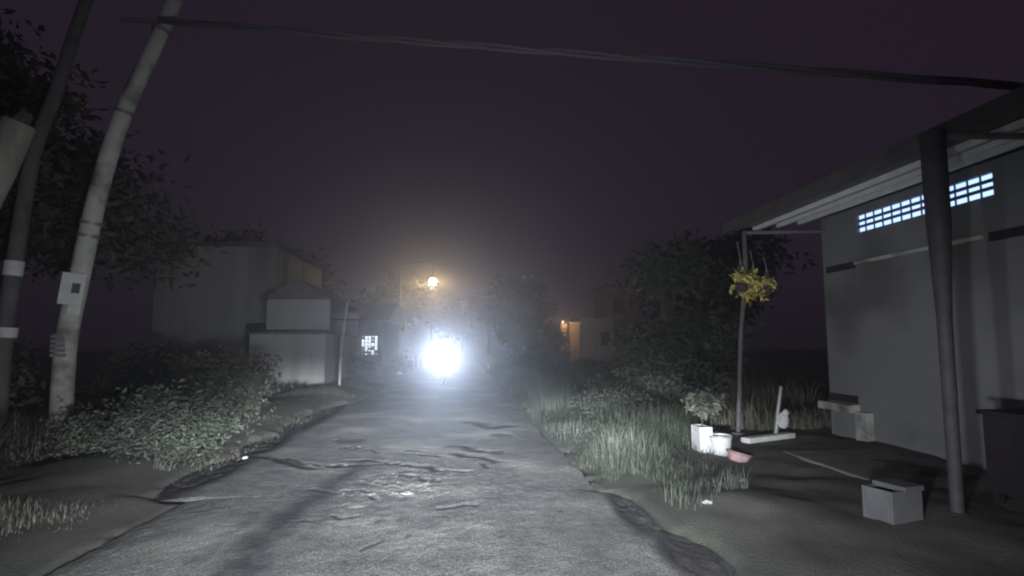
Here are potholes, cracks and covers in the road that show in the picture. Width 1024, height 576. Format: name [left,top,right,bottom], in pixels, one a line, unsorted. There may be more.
crack [434,496,501,510]
crack [251,420,523,470]
